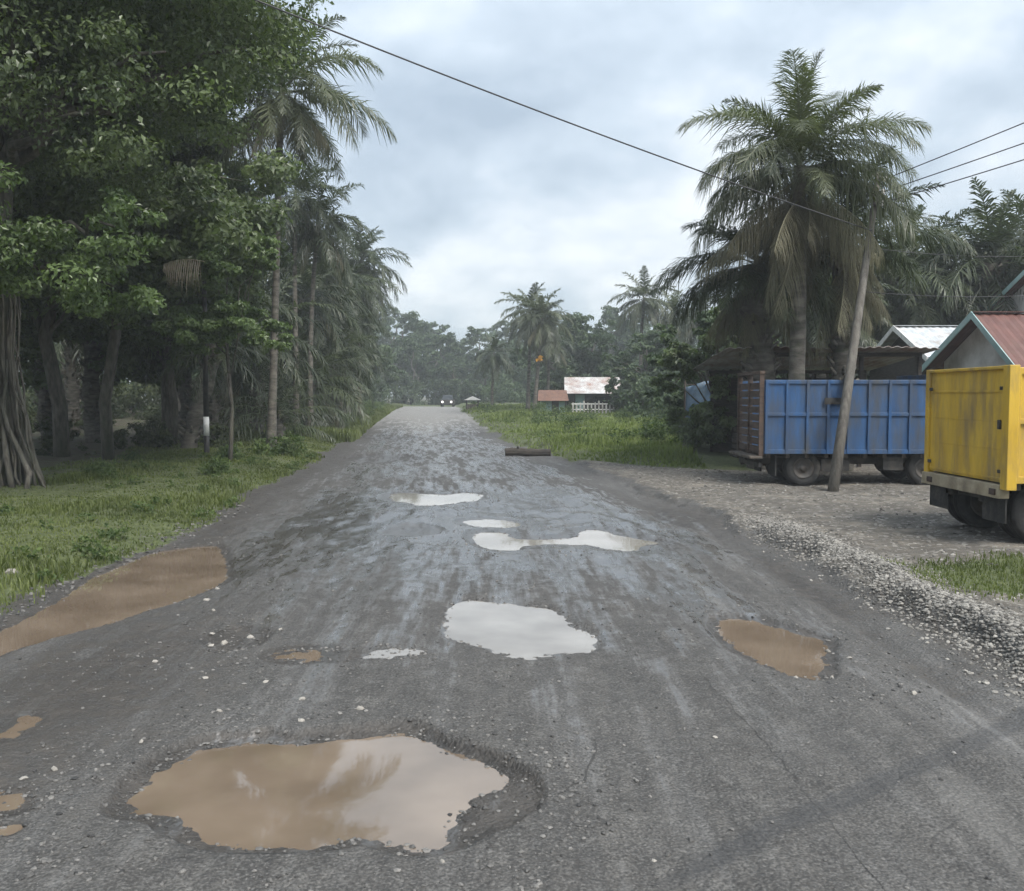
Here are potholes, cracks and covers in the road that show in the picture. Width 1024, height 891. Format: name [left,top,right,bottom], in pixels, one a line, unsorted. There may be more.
pothole [0,711,53,744]
pothole [253,643,358,665]
pothole [450,516,527,528]
pothole [95,716,549,856]
pothole [433,594,608,661]
pothole [0,778,42,819]
pothole [377,491,489,506]
pothole [351,641,433,661]
pothole [0,542,239,657]
pothole [701,612,846,681]
crack [542,741,597,801]
